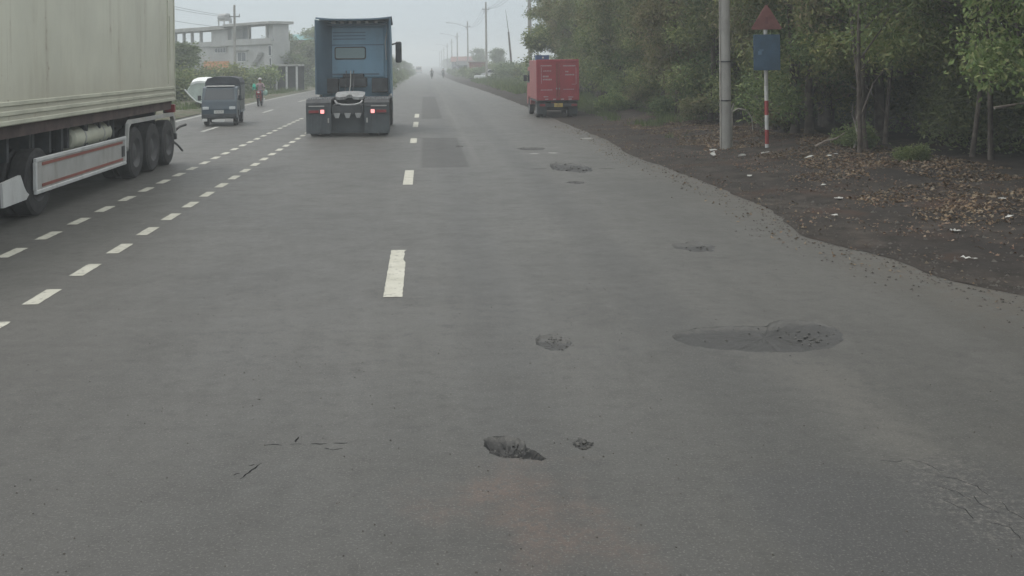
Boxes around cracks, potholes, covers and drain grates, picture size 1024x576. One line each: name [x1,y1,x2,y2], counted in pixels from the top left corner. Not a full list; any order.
crack [880,459,1024,539]
pothole [483,436,546,461]
pothole [549,162,593,173]
pothole [671,240,716,252]
pothole [531,334,572,351]
pothole [572,437,594,450]
